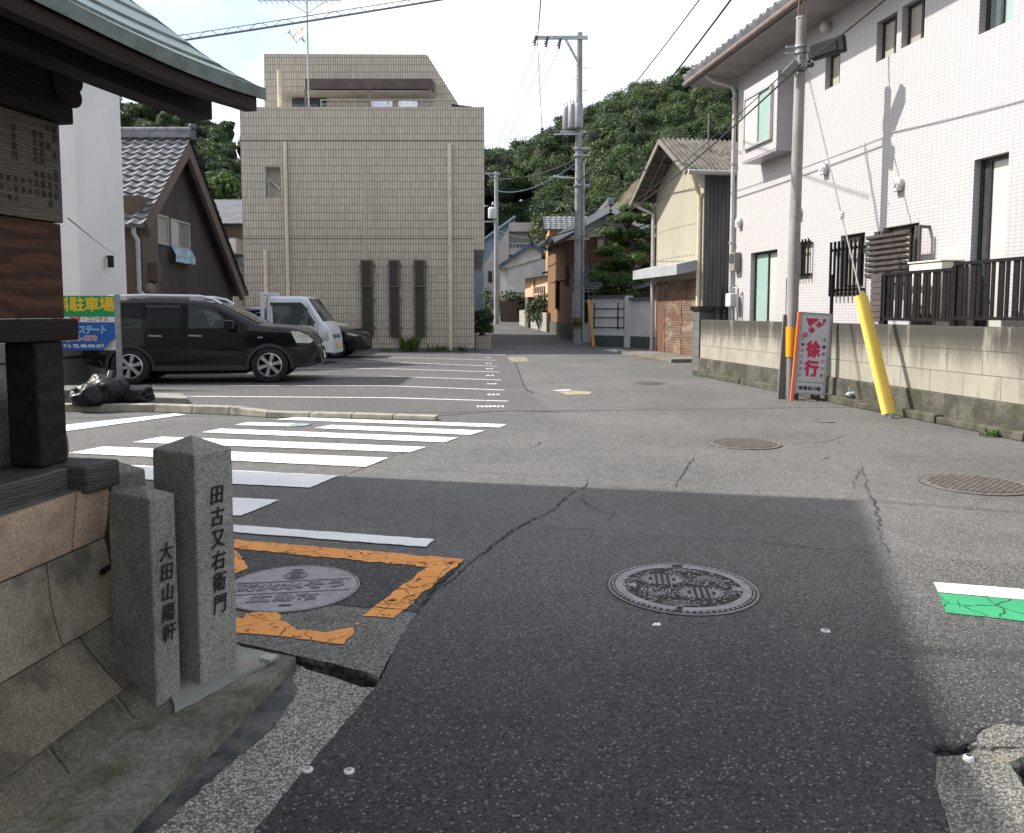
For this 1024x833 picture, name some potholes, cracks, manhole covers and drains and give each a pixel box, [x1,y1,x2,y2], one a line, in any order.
pothole [929,743,975,756]
manhole cover [708,437,783,450]
pothole [240,644,380,687]
manhole cover [918,474,1024,496]
manhole cover [606,564,762,617]
crack [359,446,925,612]
manhole cover [235,566,362,614]
pothole [1008,757,1024,786]
